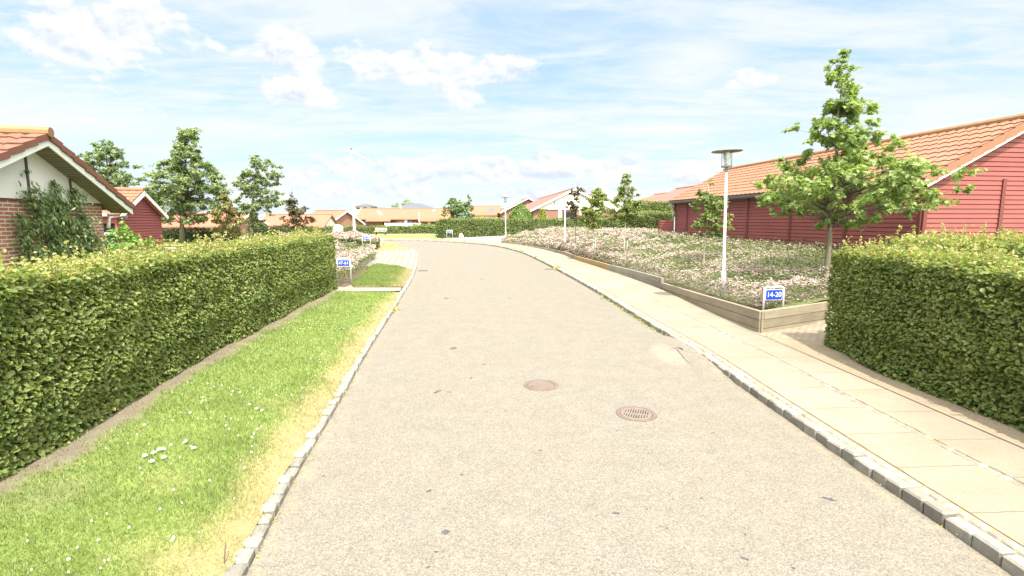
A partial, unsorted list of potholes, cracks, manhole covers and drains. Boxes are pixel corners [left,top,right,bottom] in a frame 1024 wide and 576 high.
manhole cover [524,380,558,391]
